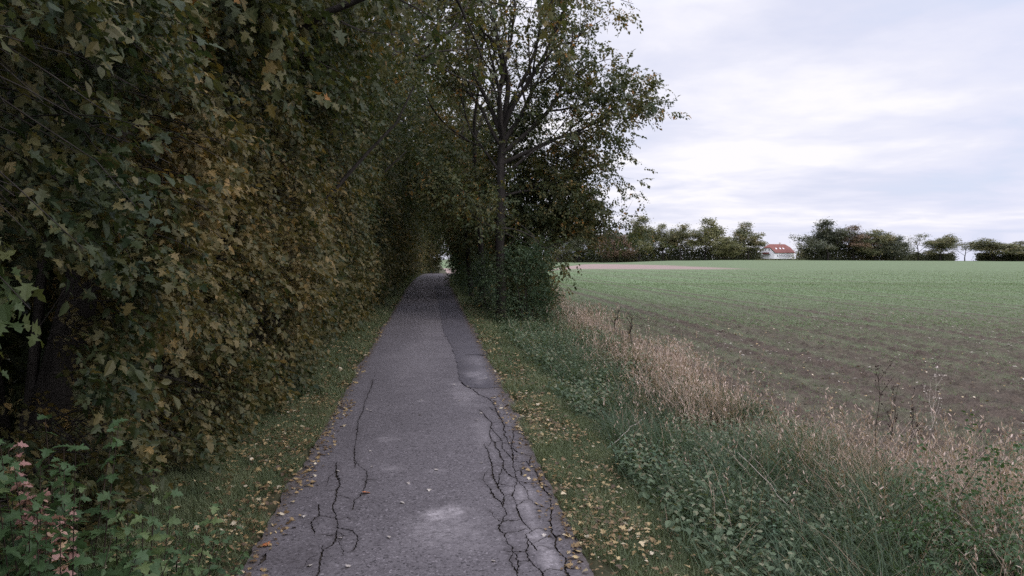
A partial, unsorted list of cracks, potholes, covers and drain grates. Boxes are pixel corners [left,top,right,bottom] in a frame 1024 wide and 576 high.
crack [470,388,573,576]
crack [305,380,373,576]
